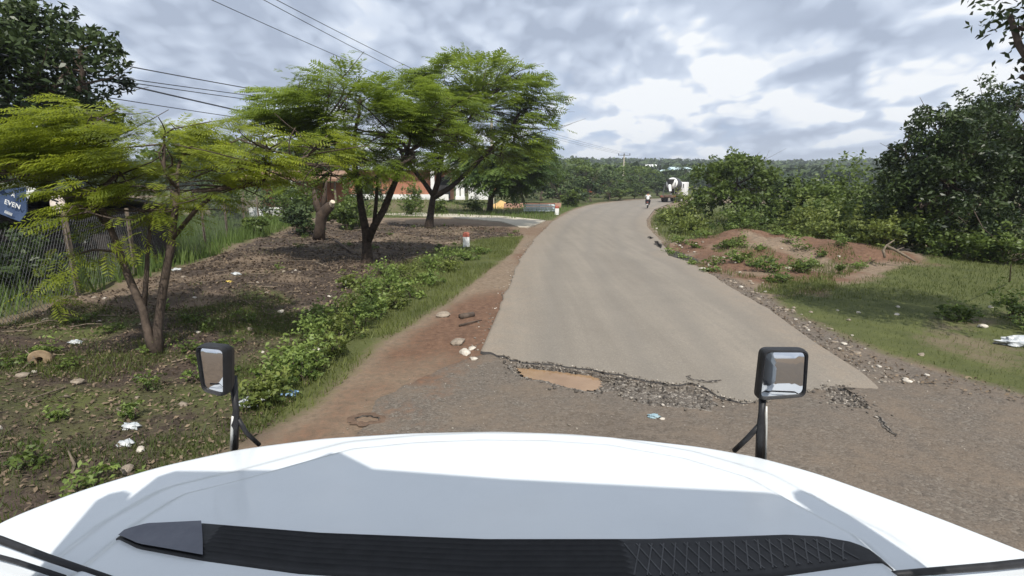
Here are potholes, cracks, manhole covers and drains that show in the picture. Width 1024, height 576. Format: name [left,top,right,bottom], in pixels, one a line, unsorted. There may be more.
pothole [503,360,629,397]
crack [686,375,721,383]
crack [875,414,898,436]
